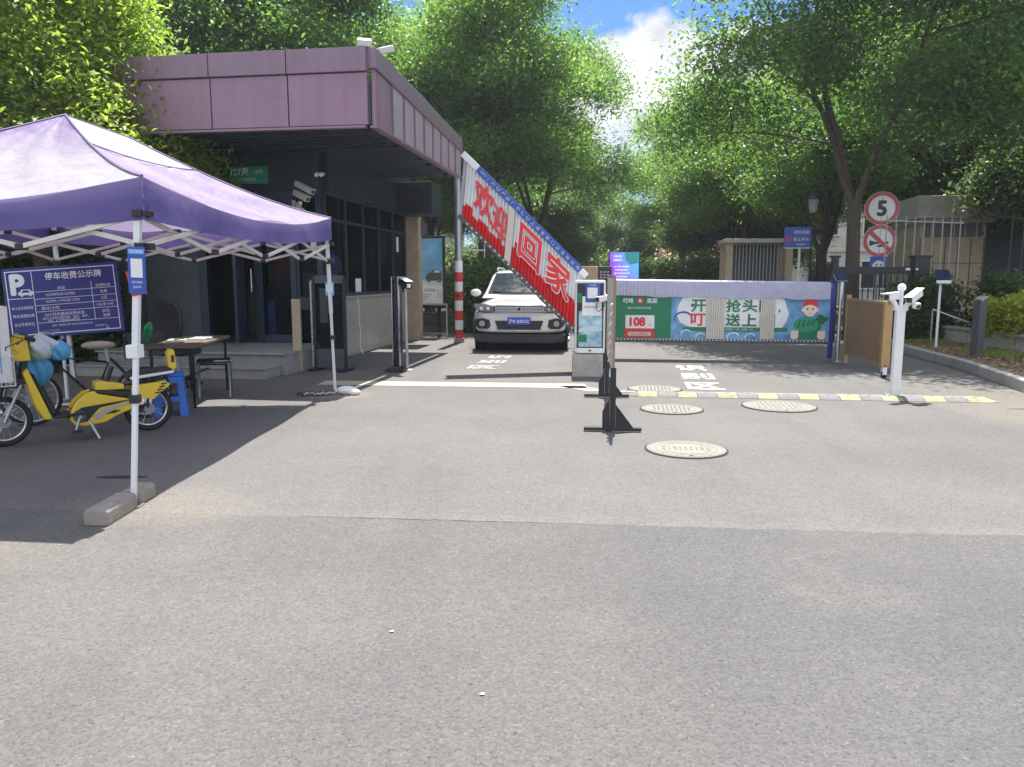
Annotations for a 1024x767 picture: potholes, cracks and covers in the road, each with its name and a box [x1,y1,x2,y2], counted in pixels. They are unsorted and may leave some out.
manhole cover [644,440,729,459]
manhole cover [741,400,818,413]
manhole cover [639,404,704,415]
